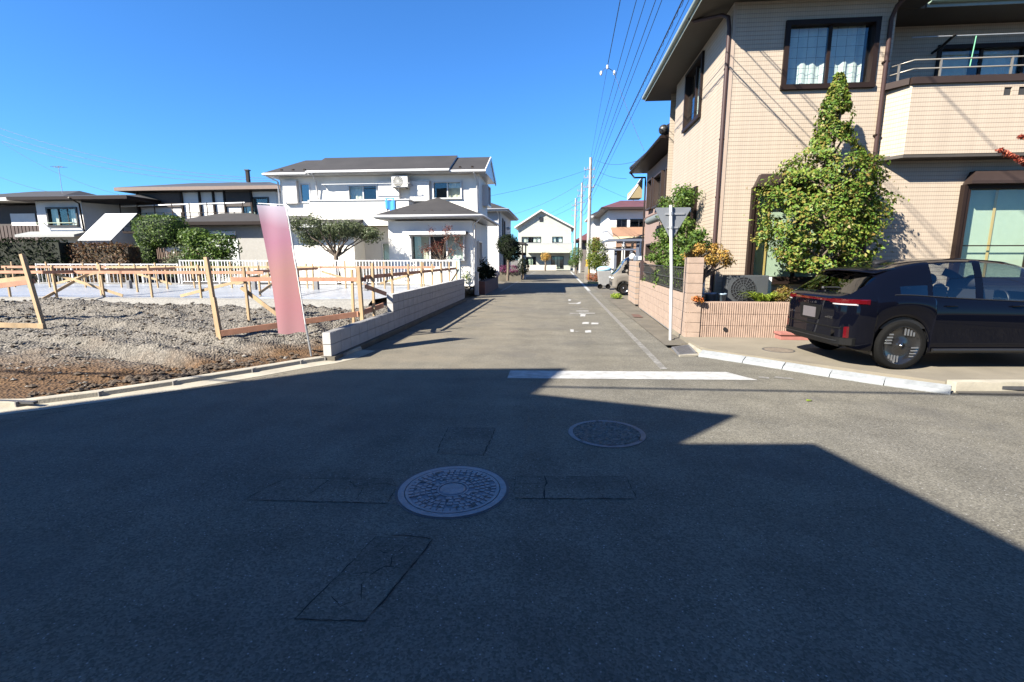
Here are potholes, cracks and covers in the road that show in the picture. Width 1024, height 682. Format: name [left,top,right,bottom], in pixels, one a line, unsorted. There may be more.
crack [294,535,433,621]
manhole cover [395,465,509,520]
crack [514,476,636,499]
manhole cover [568,420,646,448]
